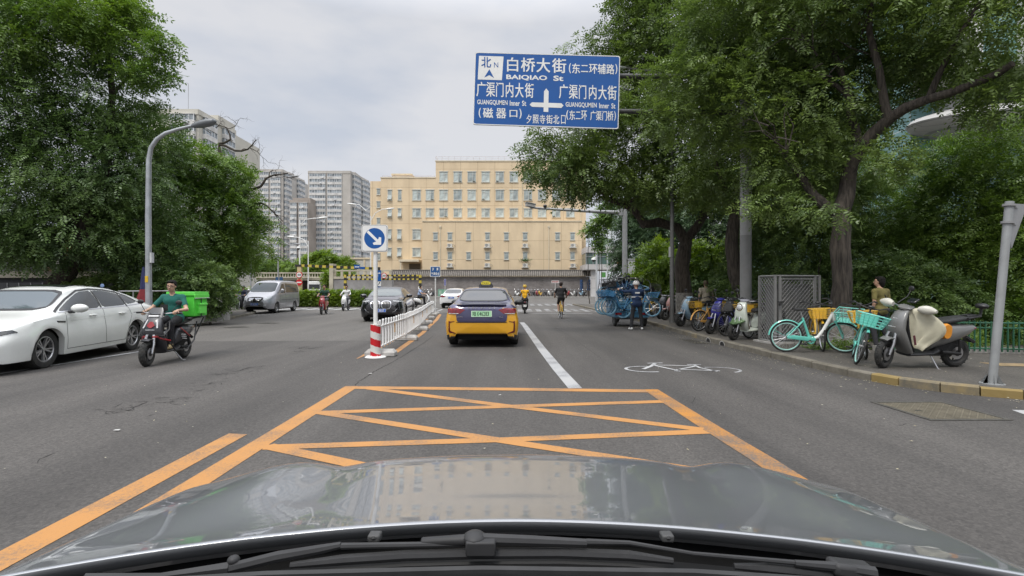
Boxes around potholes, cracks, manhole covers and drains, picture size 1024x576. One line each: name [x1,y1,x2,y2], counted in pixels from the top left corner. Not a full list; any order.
crack [97,367,264,416]
manhole cover [872,401,1012,421]
